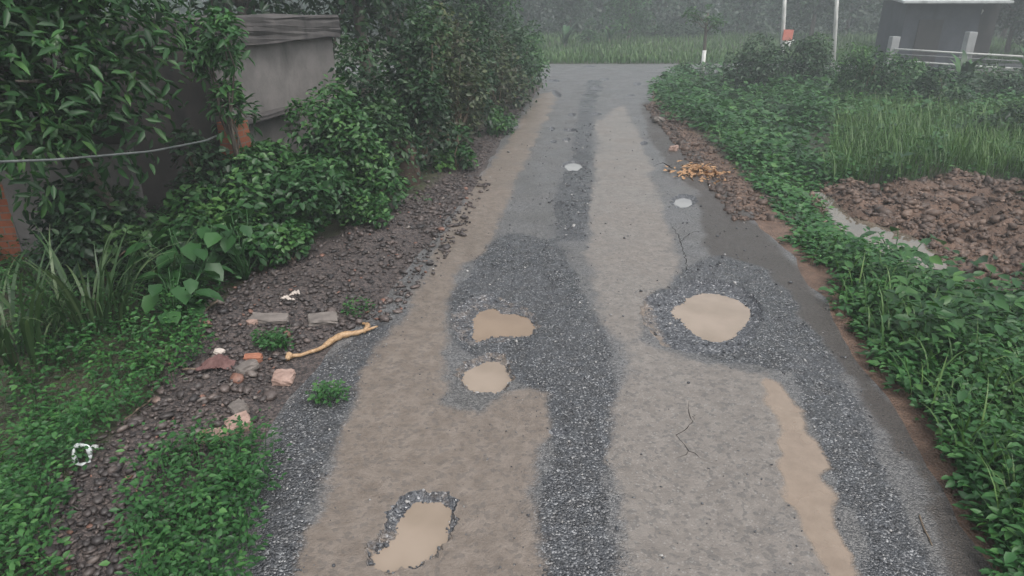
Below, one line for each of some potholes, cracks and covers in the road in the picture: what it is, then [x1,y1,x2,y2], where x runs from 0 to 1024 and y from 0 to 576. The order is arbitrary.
pothole [639,278,764,354]
pothole [449,294,542,346]
crack [676,405,714,464]
pothole [364,489,460,575]
pothole [454,352,516,394]
